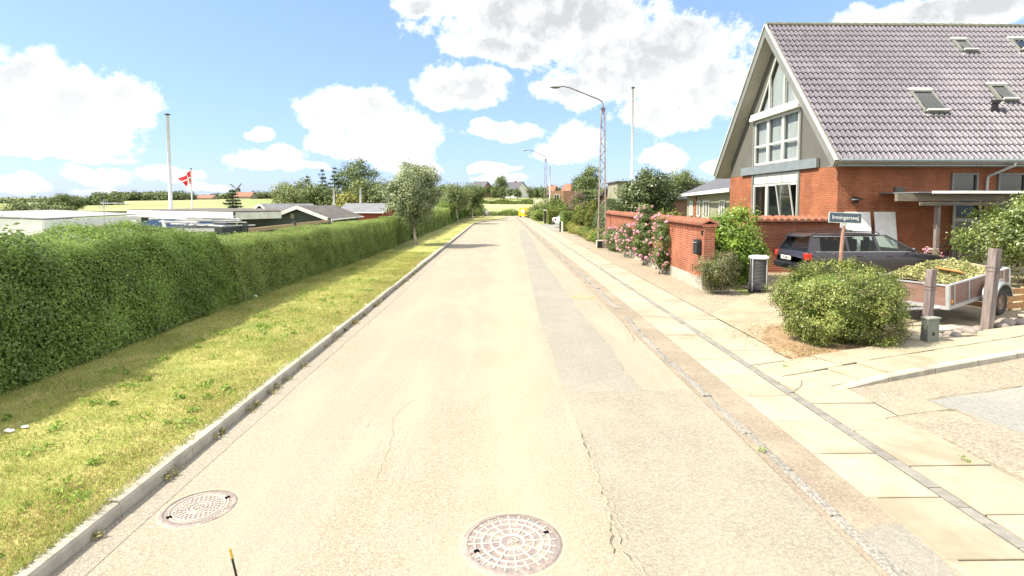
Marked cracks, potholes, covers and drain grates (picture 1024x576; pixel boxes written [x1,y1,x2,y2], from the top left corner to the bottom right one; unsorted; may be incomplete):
crack [367,399,415,480]
crack [580,432,670,576]
manhole cover [155,489,240,530]
manhole cover [459,512,566,576]
